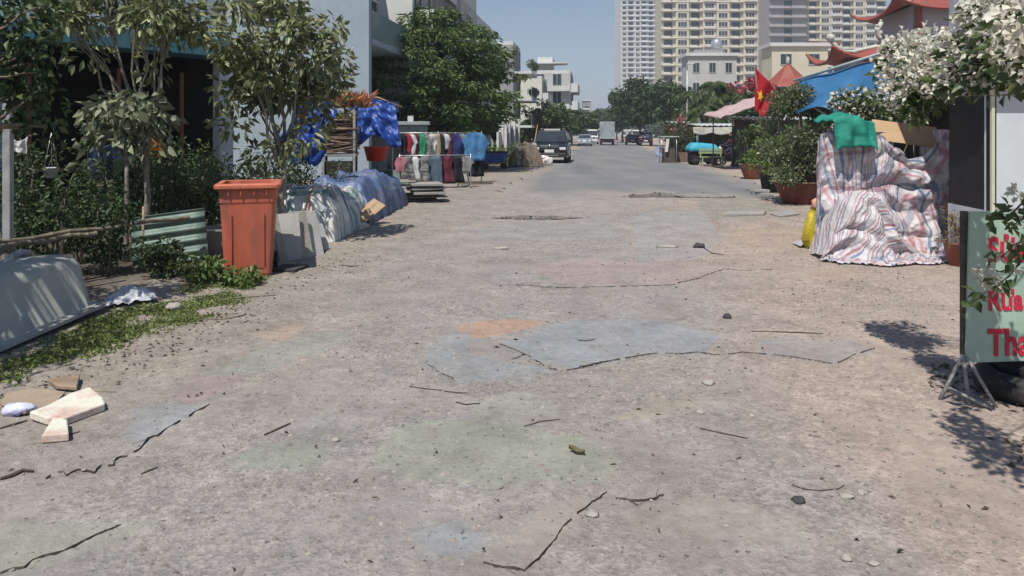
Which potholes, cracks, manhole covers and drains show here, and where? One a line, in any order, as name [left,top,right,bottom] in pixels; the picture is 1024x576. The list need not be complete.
crack [517,269,772,288]
crack [46,404,210,479]
crack [483,486,664,573]
crack [0,524,121,574]
